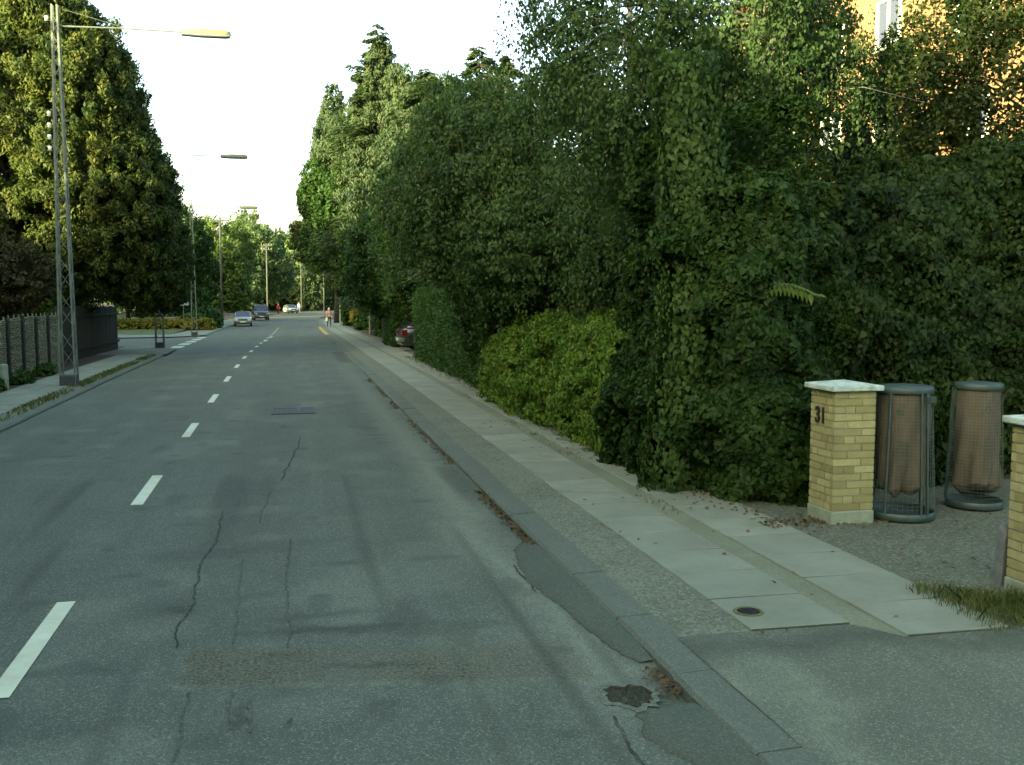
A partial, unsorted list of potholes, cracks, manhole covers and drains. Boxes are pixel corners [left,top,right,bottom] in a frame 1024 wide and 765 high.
manhole cover [271,407,316,415]
crack [259,437,301,648]
crack [171,691,191,762]
crack [613,715,645,765]
manhole cover [733,606,764,616]
crack [226,691,255,732]
crack [174,511,244,647]
pothole [594,681,663,712]
